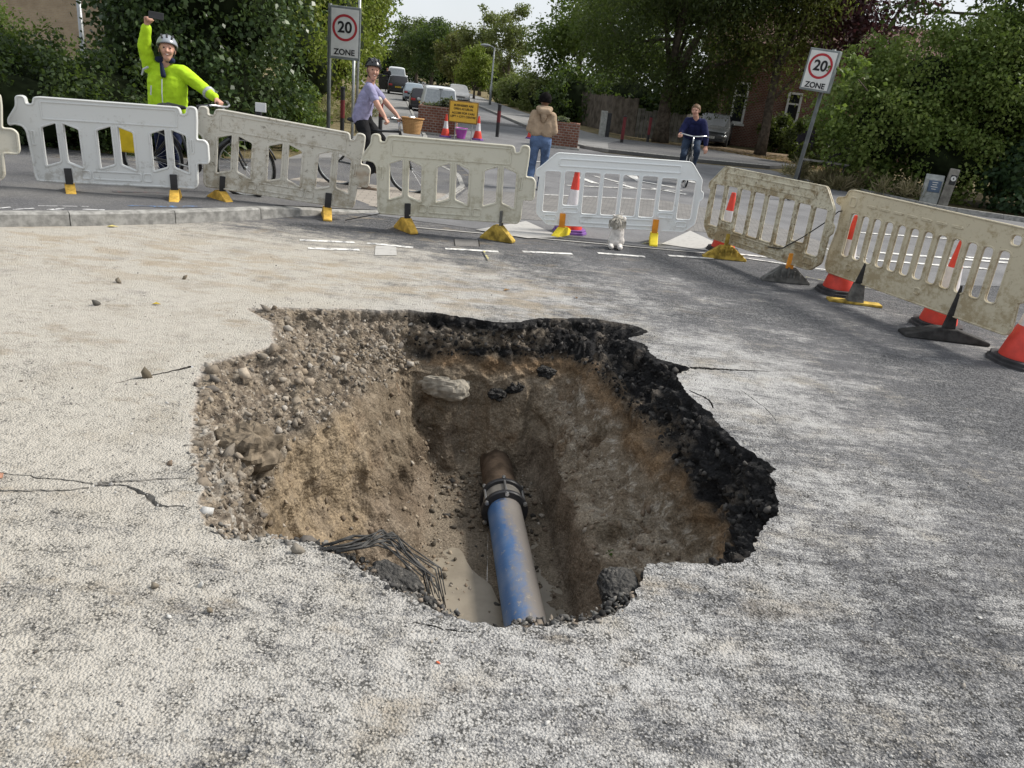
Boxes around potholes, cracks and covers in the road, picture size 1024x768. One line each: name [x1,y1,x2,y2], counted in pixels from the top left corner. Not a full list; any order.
crack [118,366,191,383]
pothole [188,307,779,628]
